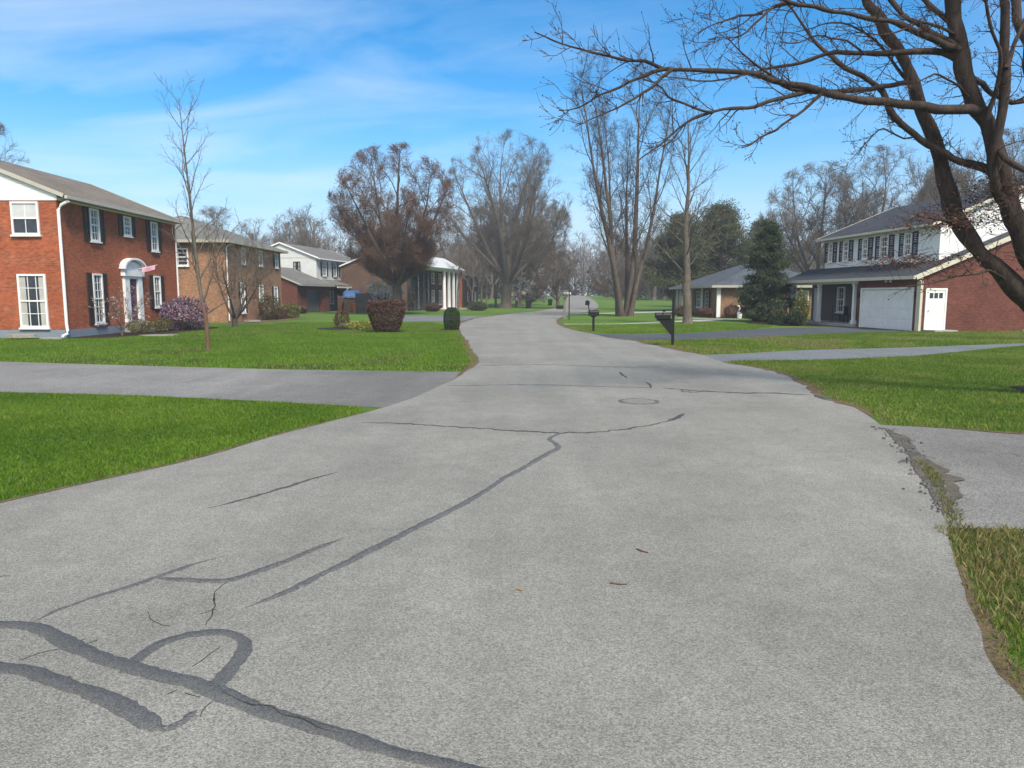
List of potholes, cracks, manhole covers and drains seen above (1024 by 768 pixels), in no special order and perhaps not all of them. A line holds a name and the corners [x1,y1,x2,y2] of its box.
crack [19,611,220,717]
crack [448,364,837,400]
